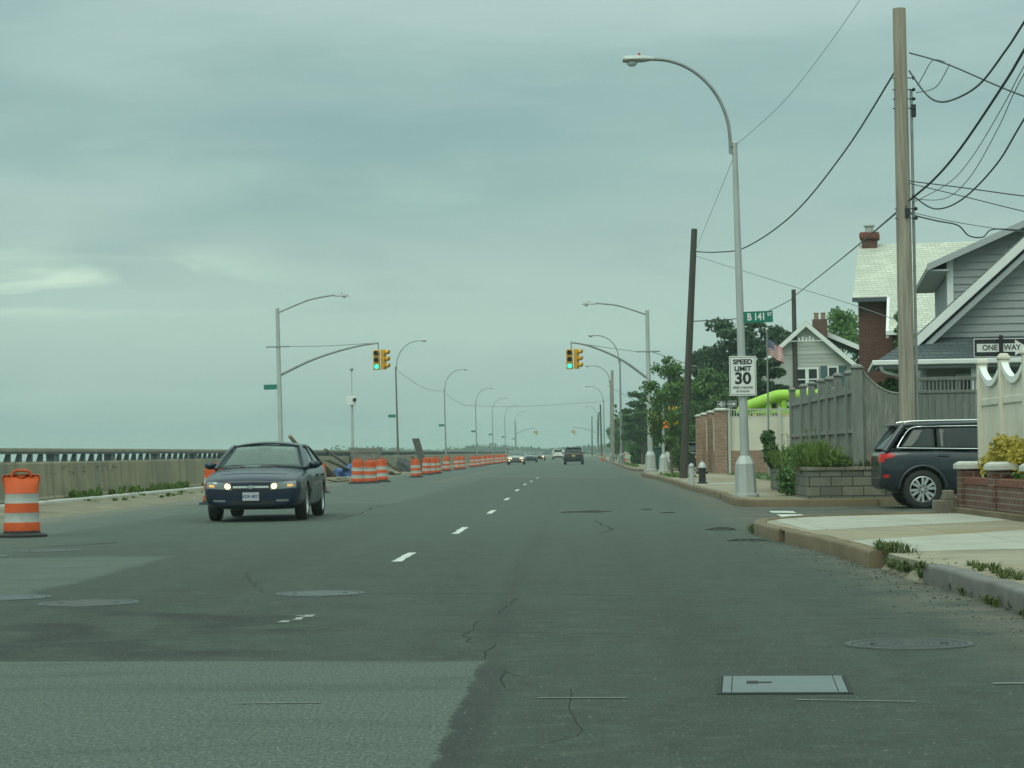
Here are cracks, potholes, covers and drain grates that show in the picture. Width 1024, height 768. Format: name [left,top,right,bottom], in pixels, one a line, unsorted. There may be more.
utility cover [717,676,854,695]
manhole cover [37,599,140,607]
manhole cover [844,638,975,650]
crack [524,689,583,750]
crack [461,598,524,688]
